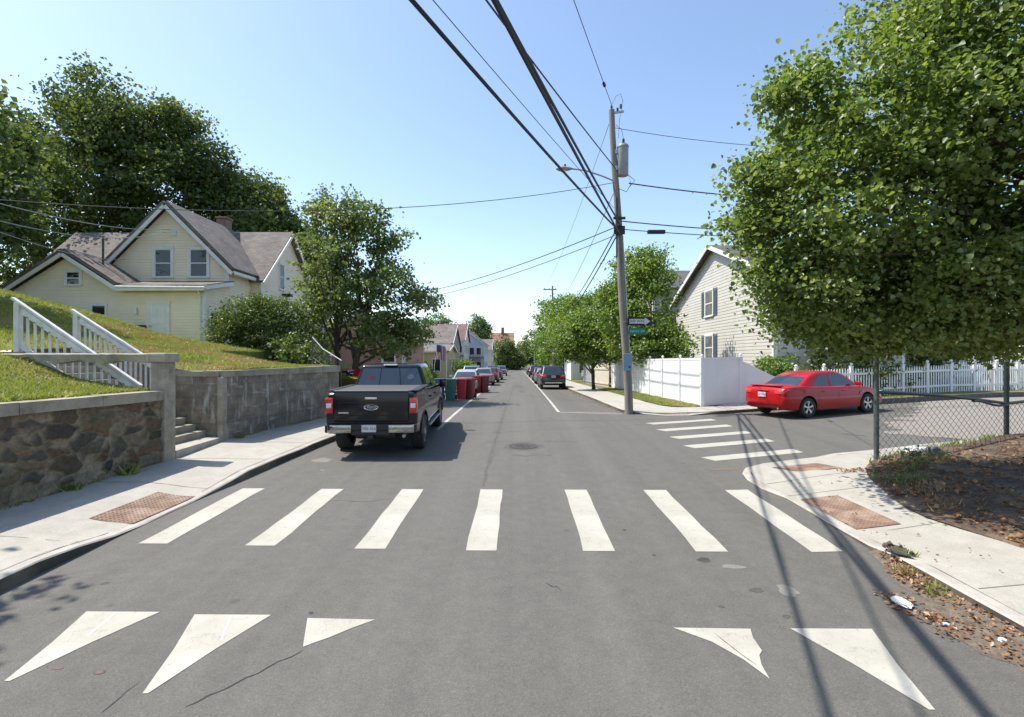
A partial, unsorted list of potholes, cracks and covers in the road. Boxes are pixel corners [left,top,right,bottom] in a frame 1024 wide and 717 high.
crack [457,386,651,487]
crack [185,650,303,707]
